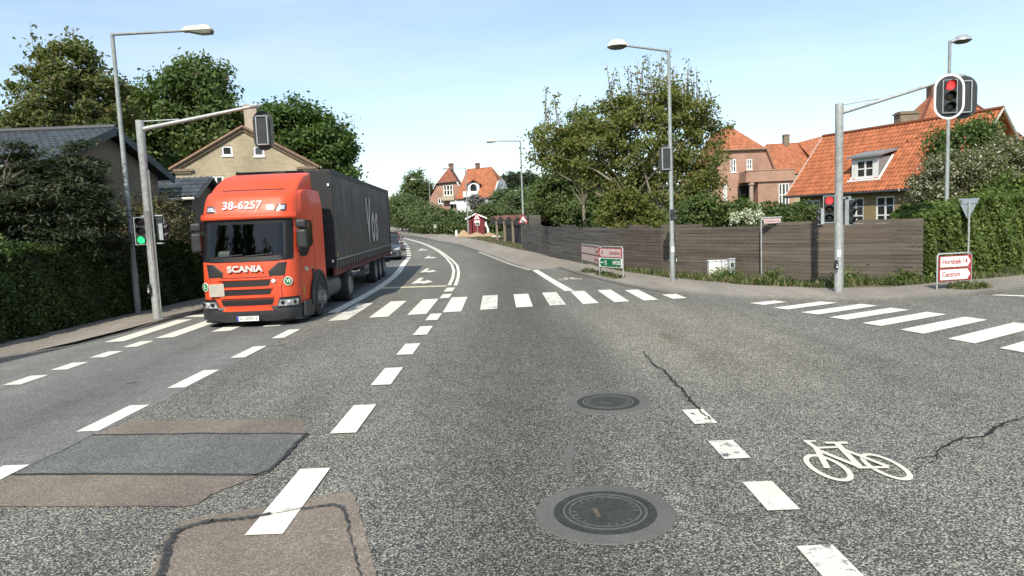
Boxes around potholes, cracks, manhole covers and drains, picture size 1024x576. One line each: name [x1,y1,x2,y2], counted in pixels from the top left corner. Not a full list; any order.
manhole cover [565,391,652,415]
manhole cover [535,485,677,545]
crack [914,417,1023,463]
crack [643,351,710,419]
